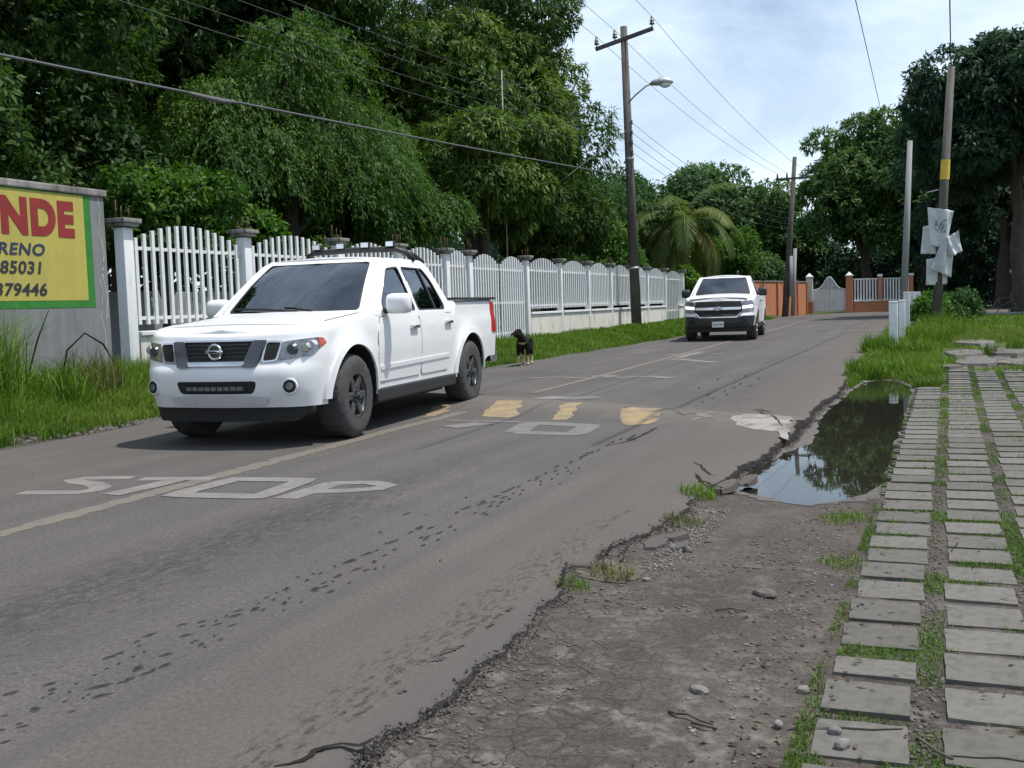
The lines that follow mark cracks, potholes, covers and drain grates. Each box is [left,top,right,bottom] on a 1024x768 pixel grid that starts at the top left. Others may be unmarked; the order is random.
pothole [730,378,917,506]
crack [694,462,726,489]
crack [557,561,568,585]
crack [597,539,629,561]
crack [274,735,382,766]
